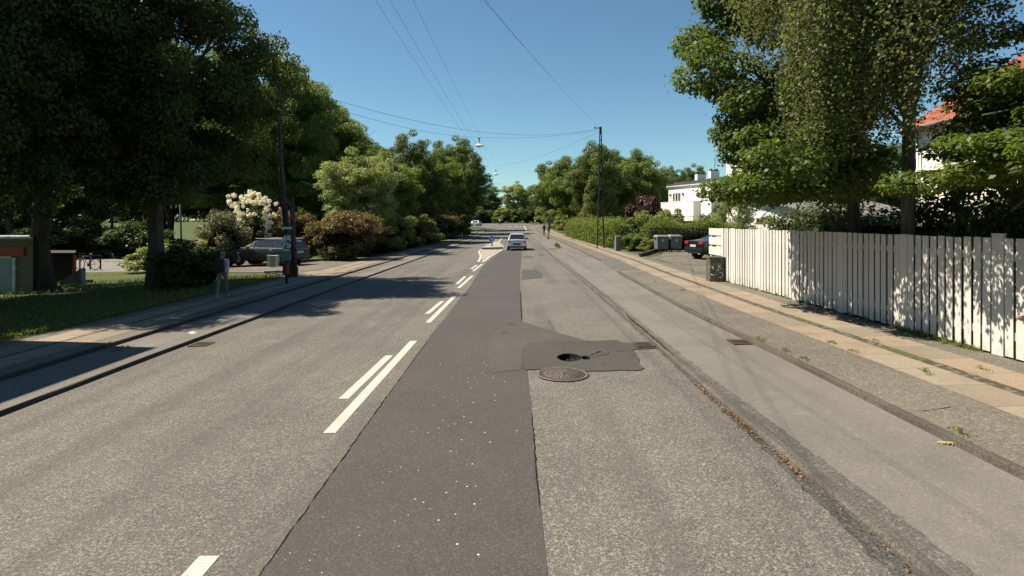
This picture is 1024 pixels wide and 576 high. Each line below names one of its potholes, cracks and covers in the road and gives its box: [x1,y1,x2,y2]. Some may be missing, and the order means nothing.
pothole [557,353,590,362]
manhole cover [537,367,589,382]
